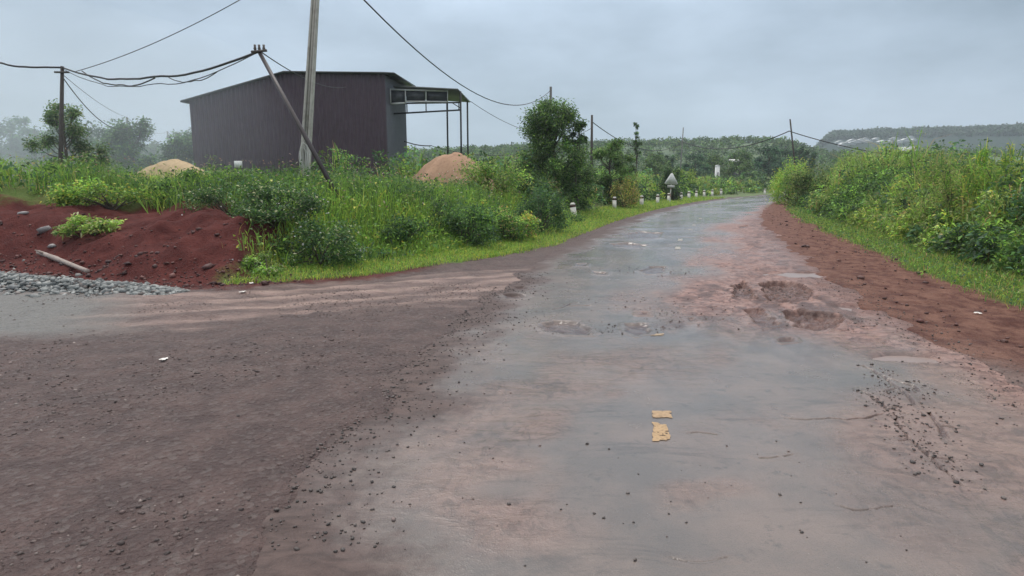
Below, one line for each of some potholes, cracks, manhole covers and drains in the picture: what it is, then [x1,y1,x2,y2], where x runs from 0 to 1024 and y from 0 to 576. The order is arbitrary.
pothole [616,321,660,338]
pothole [776,307,852,334]
pothole [738,306,787,329]
pothole [725,280,763,301]
pothole [754,280,820,305]
pothole [529,318,602,337]
